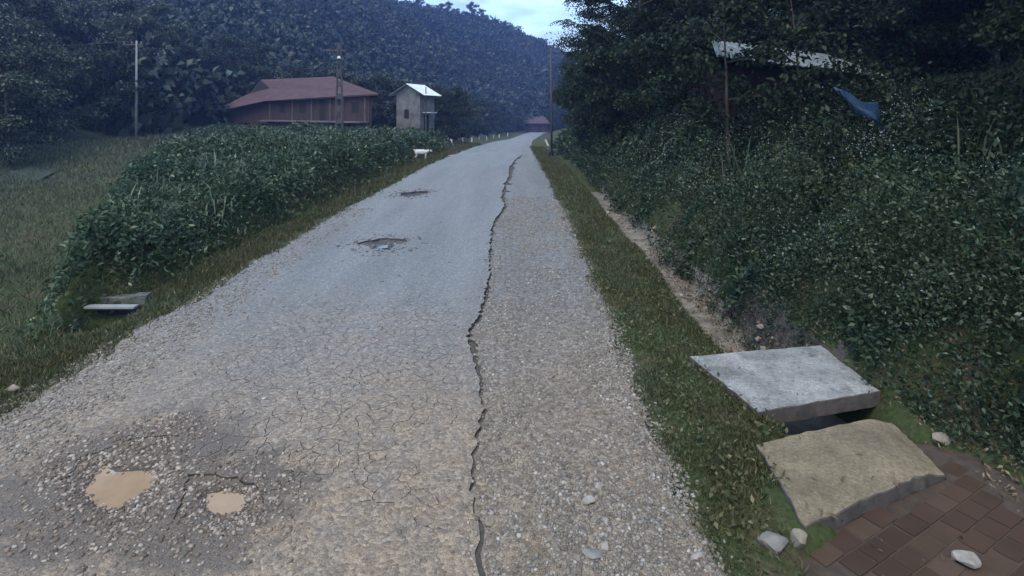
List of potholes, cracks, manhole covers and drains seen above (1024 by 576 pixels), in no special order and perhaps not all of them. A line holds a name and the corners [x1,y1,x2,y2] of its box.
pothole [64,435,181,536]
pothole [174,473,265,534]
crack [185,290,465,533]
pothole [362,238,408,249]
crack [466,156,521,576]
